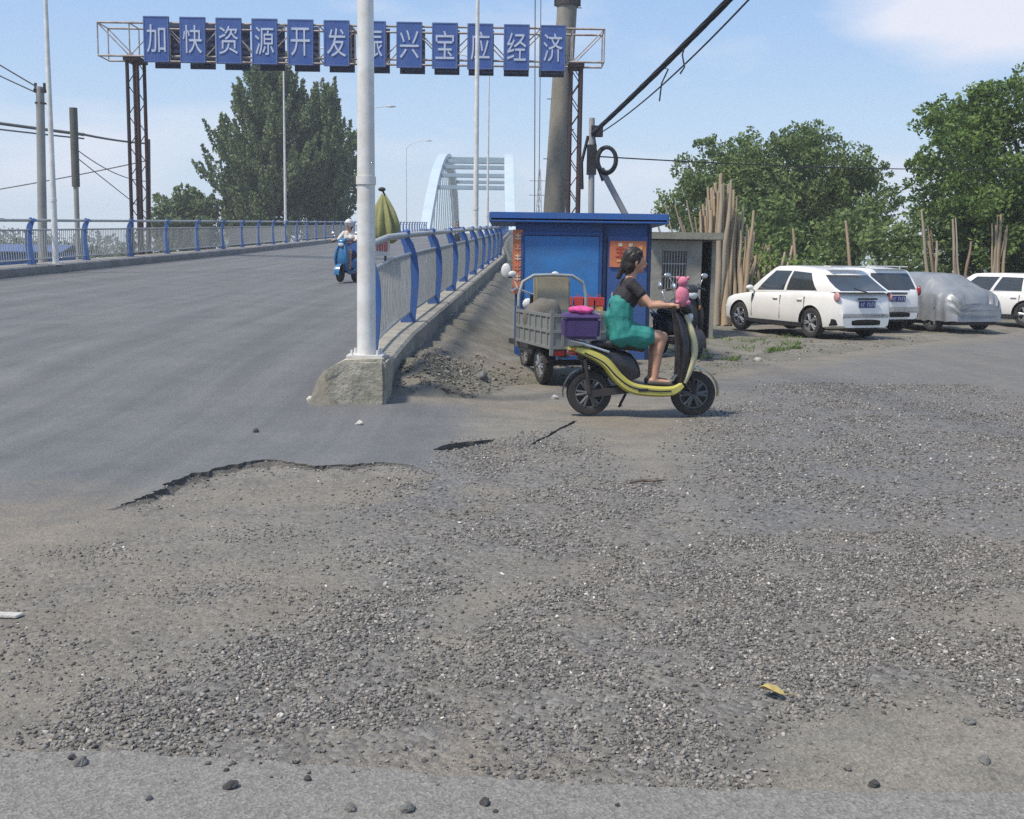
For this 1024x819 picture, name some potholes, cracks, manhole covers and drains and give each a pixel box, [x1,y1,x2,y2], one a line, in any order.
crack [531,421,576,445]
